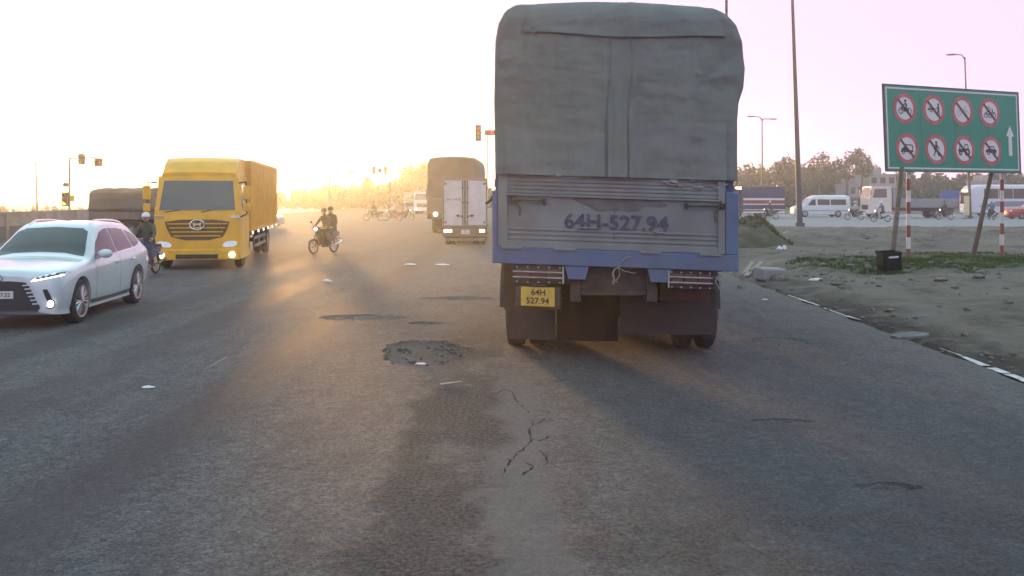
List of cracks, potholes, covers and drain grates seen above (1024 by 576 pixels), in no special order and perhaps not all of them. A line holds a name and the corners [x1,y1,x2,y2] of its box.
crack [496,388,555,481]
pothole [381,340,476,367]
